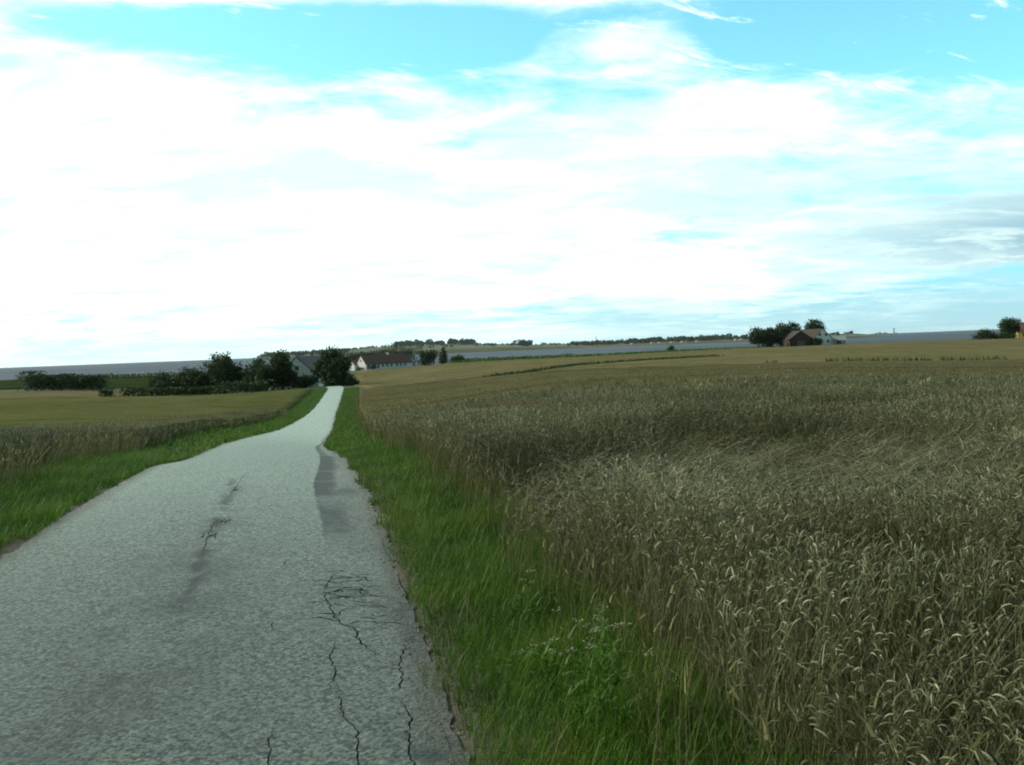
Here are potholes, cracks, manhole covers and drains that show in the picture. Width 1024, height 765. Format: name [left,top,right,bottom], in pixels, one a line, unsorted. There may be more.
crack [267,727,275,765]
crack [201,519,234,554]
crack [298,570,406,765]
